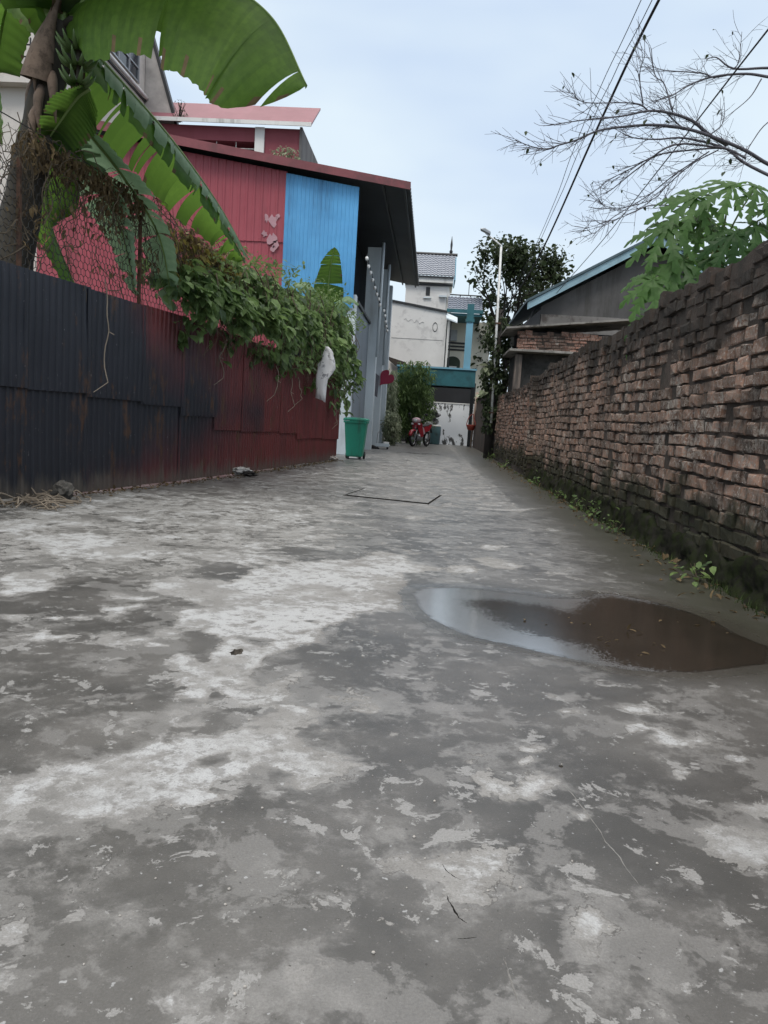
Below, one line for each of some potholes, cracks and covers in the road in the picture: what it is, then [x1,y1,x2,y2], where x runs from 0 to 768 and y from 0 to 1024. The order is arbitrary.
crack [442,864,475,939]
